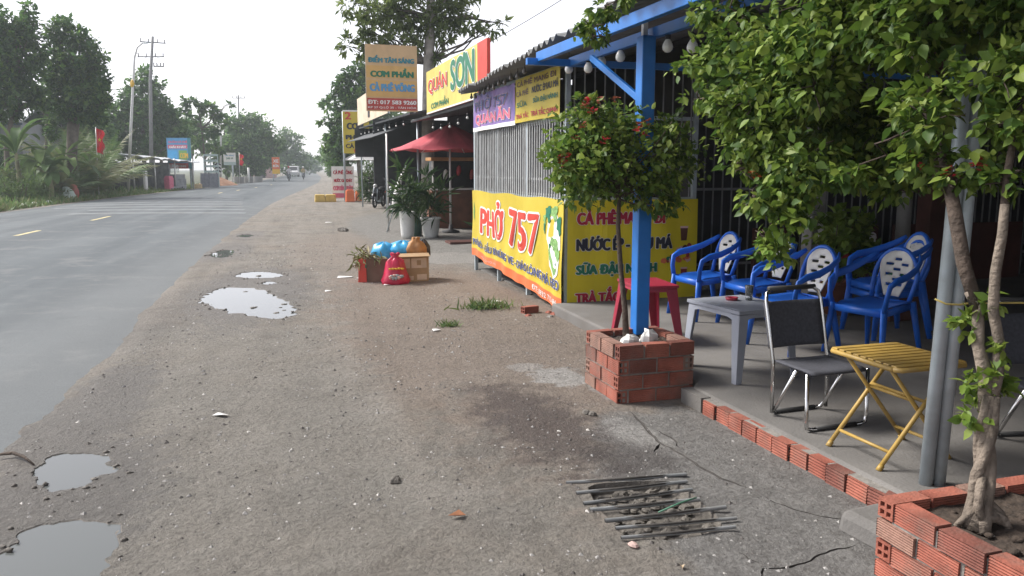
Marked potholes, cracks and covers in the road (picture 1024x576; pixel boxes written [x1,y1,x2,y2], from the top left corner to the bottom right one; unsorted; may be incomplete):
pothole [11,446,134,500]
pothole [0,513,128,576]
crack [739,545,855,576]
pothole [194,285,301,320]
pothole [235,271,289,279]
crack [631,412,744,487]
pothole [204,249,242,258]
drain grate [566,472,737,540]
crack [767,498,838,519]
